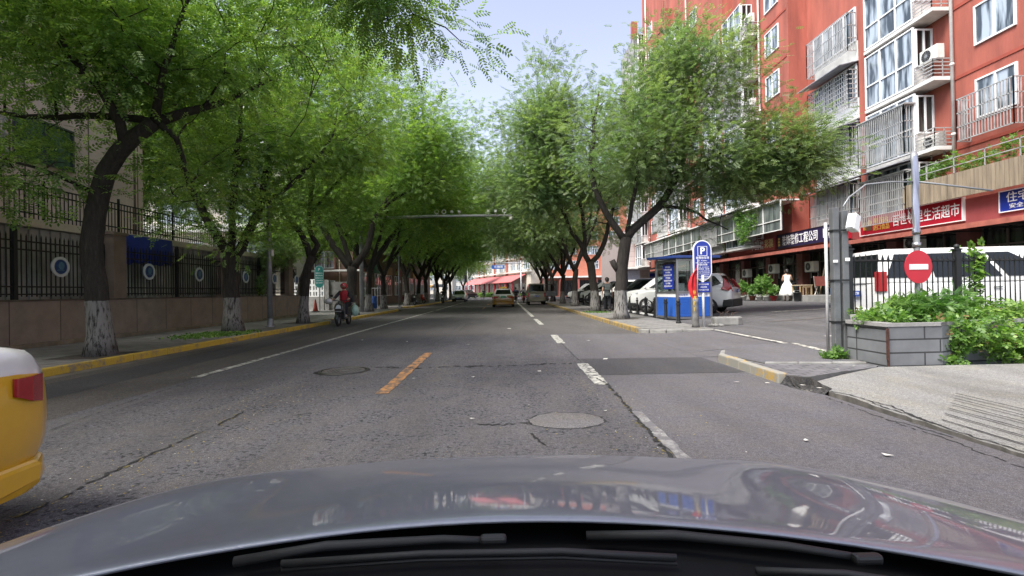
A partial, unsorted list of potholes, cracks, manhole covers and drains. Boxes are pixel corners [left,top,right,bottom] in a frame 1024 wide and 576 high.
manhole cover [527,412,607,429]
crack [481,422,546,445]
crack [596,378,674,458]
crack [14,411,244,517]
manhole cover [313,366,370,376]
